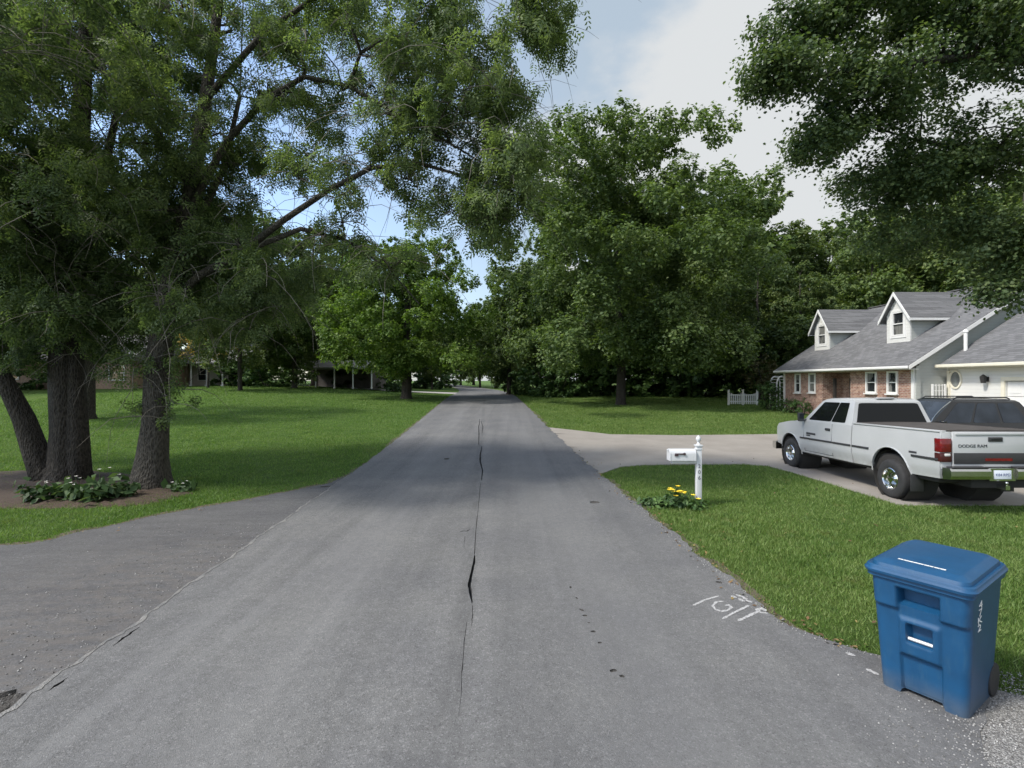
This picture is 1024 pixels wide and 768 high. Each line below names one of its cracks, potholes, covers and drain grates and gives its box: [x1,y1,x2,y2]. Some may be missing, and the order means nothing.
pothole [0,689,26,713]
crack [459,419,483,708]
